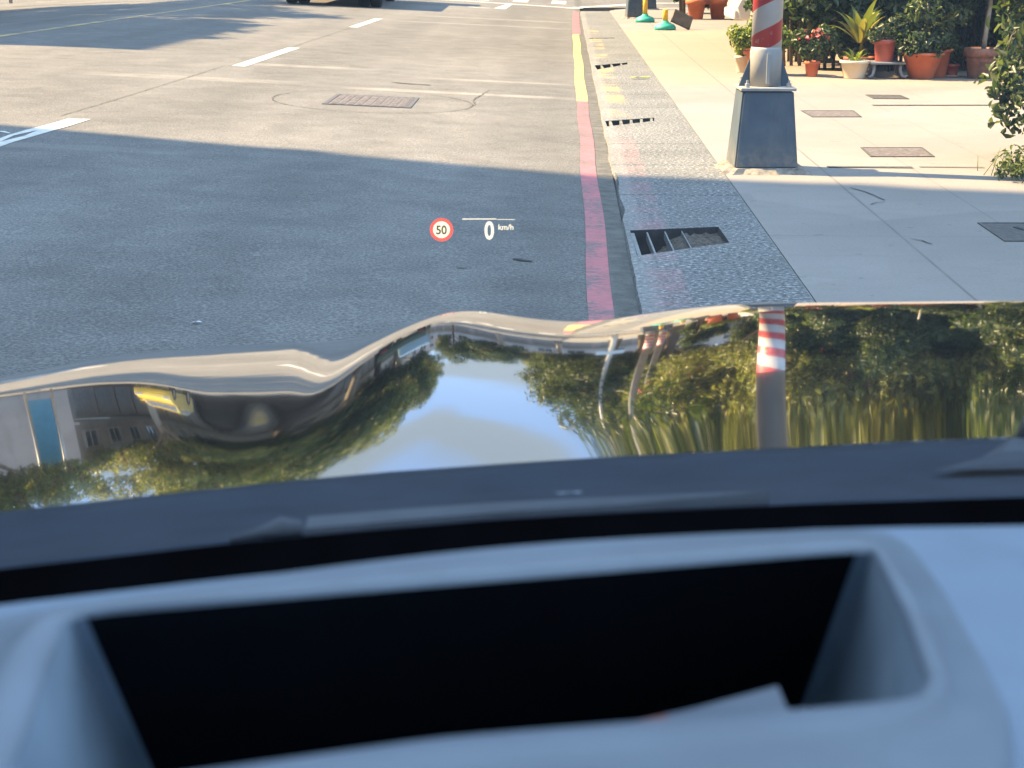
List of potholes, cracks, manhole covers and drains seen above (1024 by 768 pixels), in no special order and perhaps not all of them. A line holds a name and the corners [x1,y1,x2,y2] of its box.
utility cover [977,222,1024,242]
manhole cover [322,94,419,108]
drain grate [605,118,654,126]
utility cover [860,147,935,157]
drain grate [630,227,729,256]
